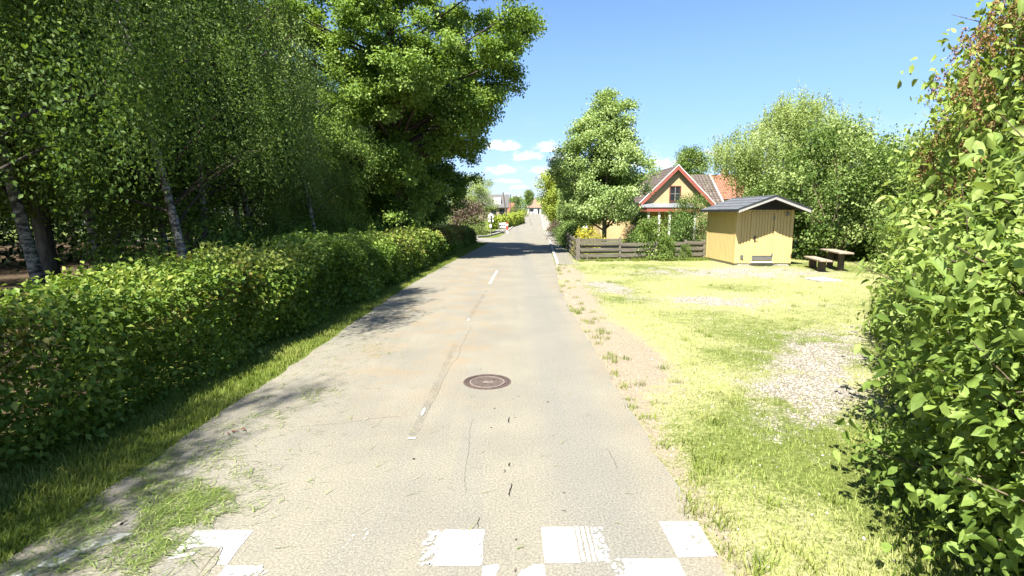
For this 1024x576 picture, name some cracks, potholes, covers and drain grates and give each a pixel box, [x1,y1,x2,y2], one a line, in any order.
manhole cover [463,374,511,390]
